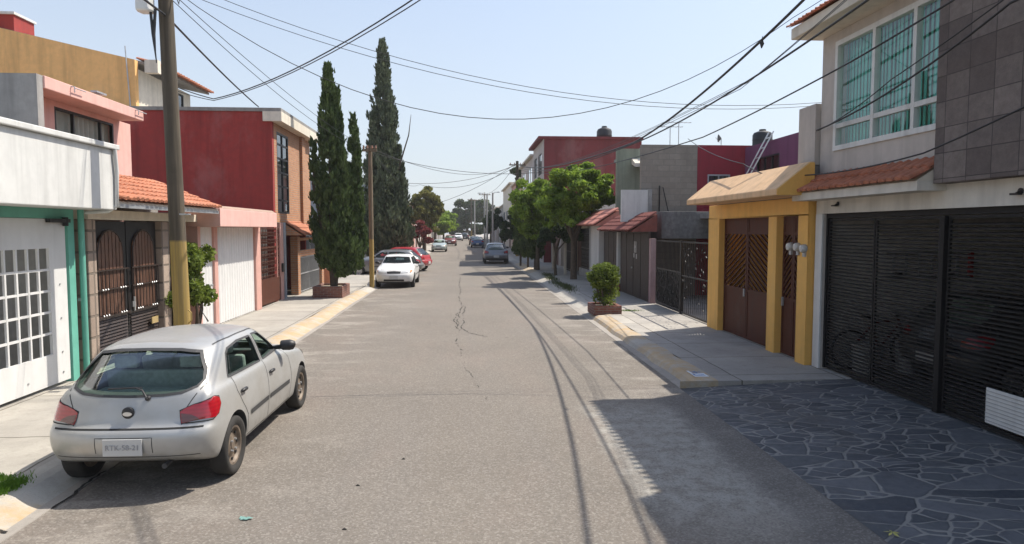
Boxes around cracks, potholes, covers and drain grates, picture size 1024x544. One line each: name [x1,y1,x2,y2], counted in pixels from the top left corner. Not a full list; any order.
crack [453,281,506,387]
